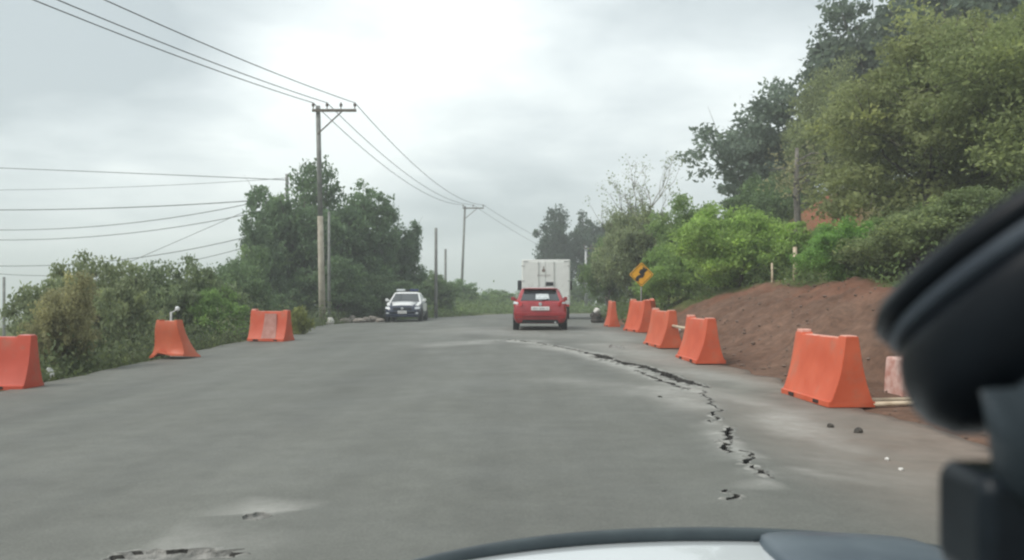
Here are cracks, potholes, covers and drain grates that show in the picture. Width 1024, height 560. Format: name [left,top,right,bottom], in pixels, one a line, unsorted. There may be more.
crack [494,339,774,500]
pothole [100,547,251,560]
pothole [241,511,272,520]
